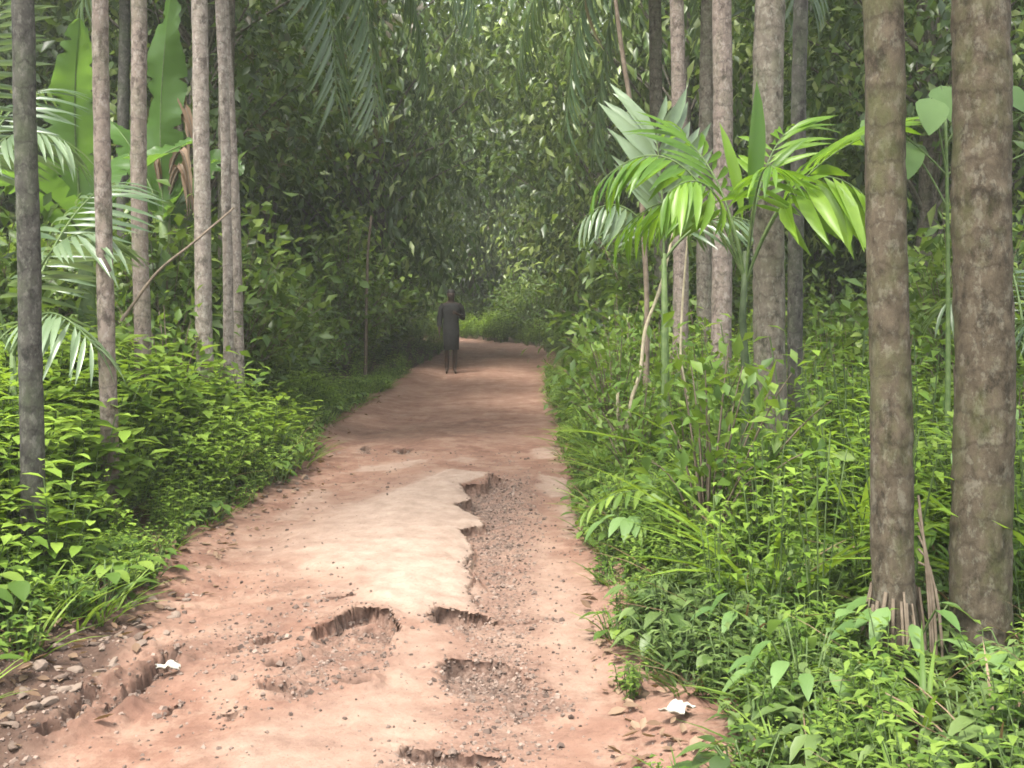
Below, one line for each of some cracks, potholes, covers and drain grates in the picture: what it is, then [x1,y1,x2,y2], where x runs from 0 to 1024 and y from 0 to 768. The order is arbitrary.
pothole [260,606,403,707]
pothole [438,658,583,722]
pothole [385,745,508,768]
pothole [456,472,535,593]
pothole [424,607,502,639]
